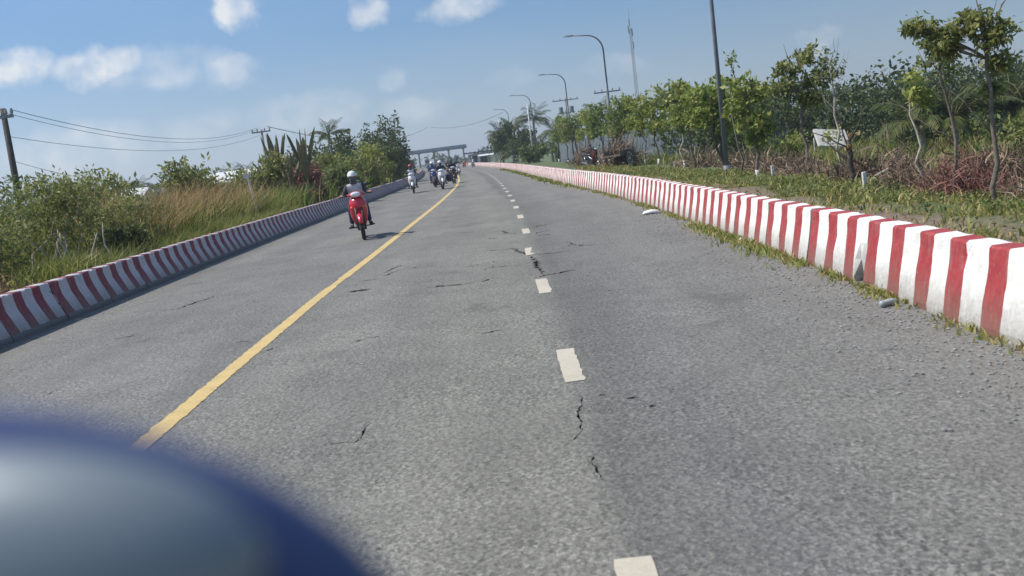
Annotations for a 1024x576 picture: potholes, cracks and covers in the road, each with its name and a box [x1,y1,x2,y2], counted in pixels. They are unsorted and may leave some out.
crack [429,225,577,288]
crack [574,395,604,480]
